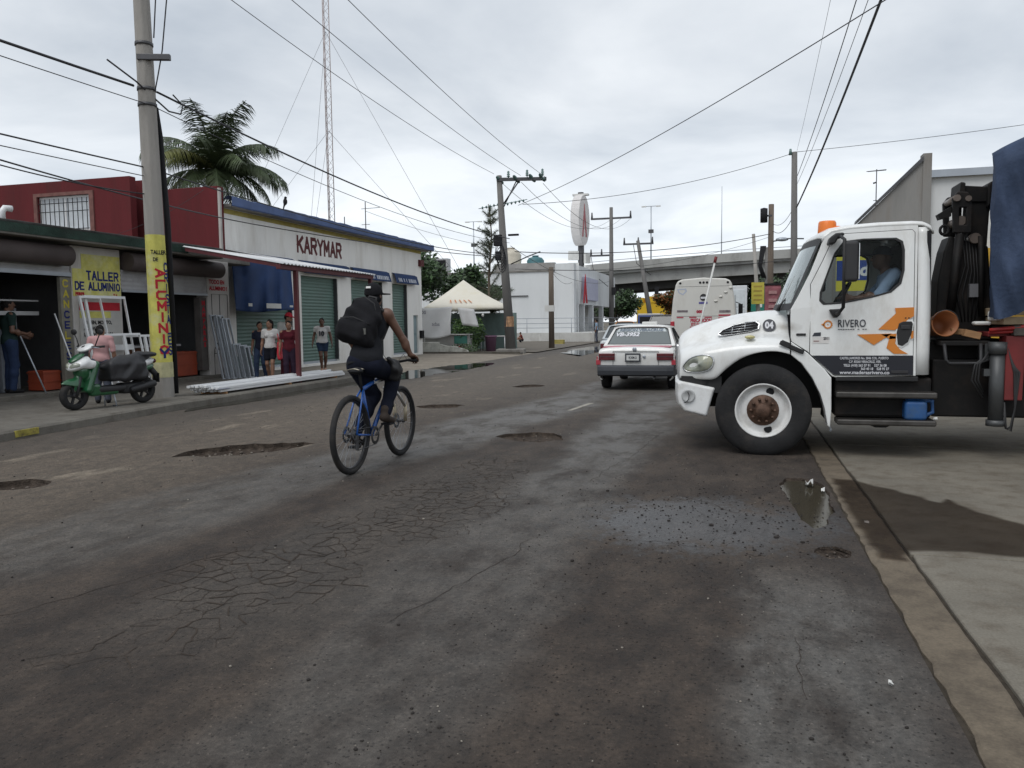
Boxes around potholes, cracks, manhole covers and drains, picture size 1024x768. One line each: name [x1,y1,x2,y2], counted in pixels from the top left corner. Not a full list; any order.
pothole [814,546,852,559]
crack [5,452,529,673]
pothole [173,442,313,457]
pothole [496,432,563,442]
pothole [0,479,51,490]
